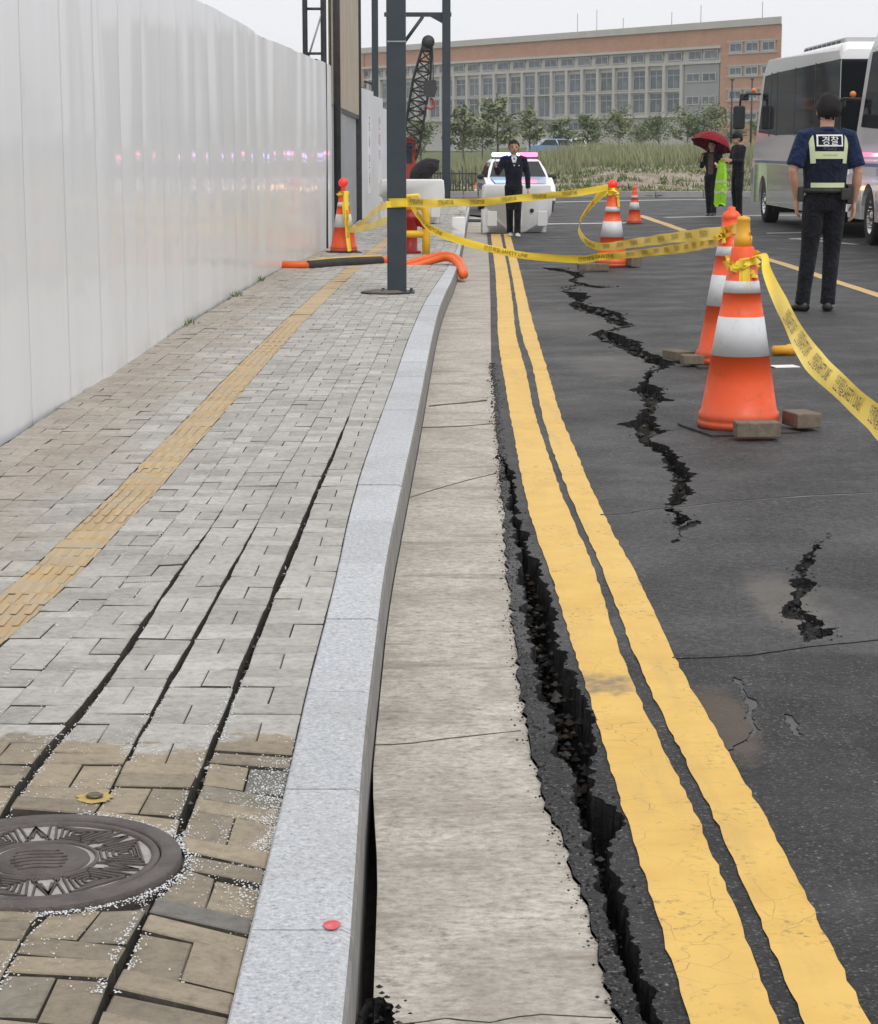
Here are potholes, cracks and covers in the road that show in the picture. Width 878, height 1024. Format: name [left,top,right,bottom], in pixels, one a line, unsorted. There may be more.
manhole cover [0,814,182,923]
crack [779,533,842,642]
crack [362,267,702,1024]
